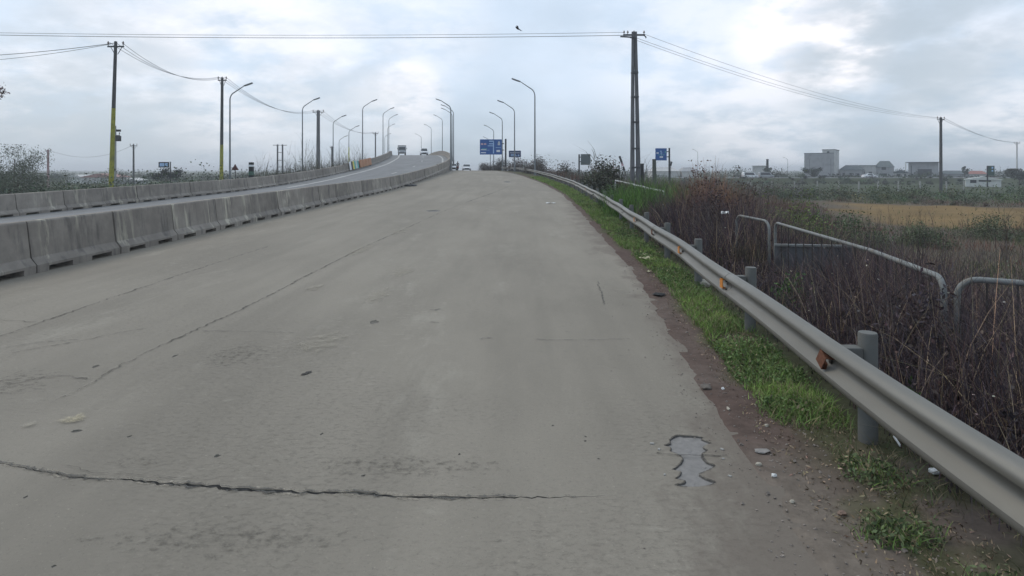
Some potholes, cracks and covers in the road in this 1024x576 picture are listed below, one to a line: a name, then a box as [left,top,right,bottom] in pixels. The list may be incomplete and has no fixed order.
crack [0,461,616,500]
pothole [650,434,732,487]
